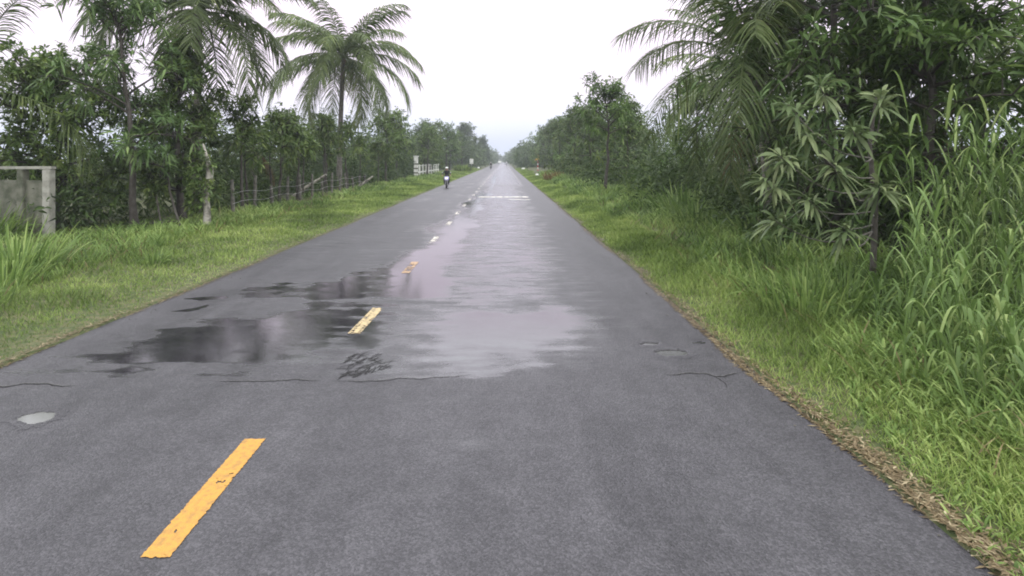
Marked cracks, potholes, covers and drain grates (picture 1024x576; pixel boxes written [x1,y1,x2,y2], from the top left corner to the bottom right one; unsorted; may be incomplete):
crack [676,372,736,387]
pothole [633,339,665,348]
pothole [0,406,69,431]
pothole [646,345,700,359]
